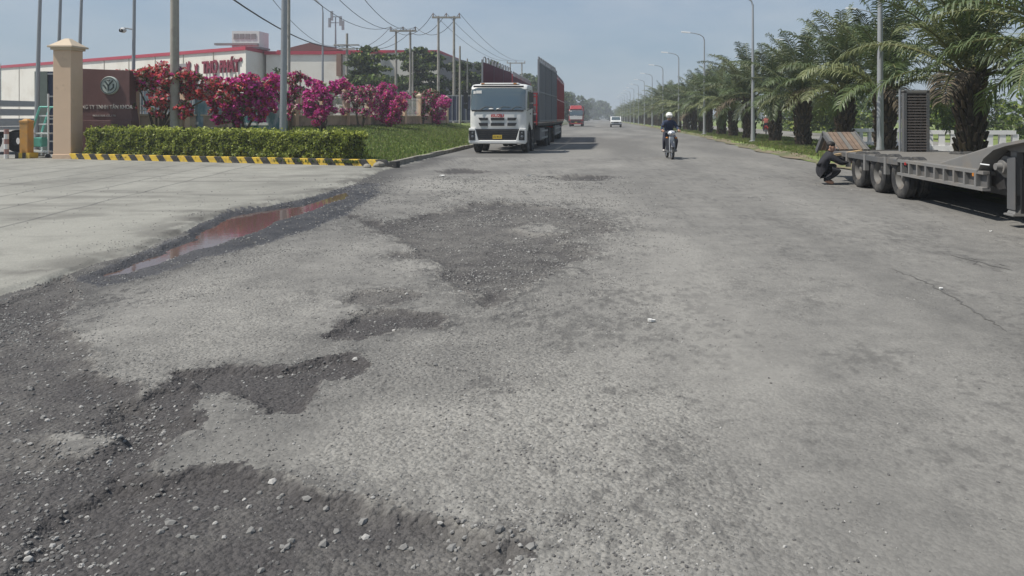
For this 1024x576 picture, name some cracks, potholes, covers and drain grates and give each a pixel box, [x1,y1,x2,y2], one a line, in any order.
pothole [77,183,380,288]
pothole [345,200,620,310]
crack [894,269,1006,331]
pothole [115,459,538,576]
pothole [319,307,450,341]
pothole [146,350,372,441]
